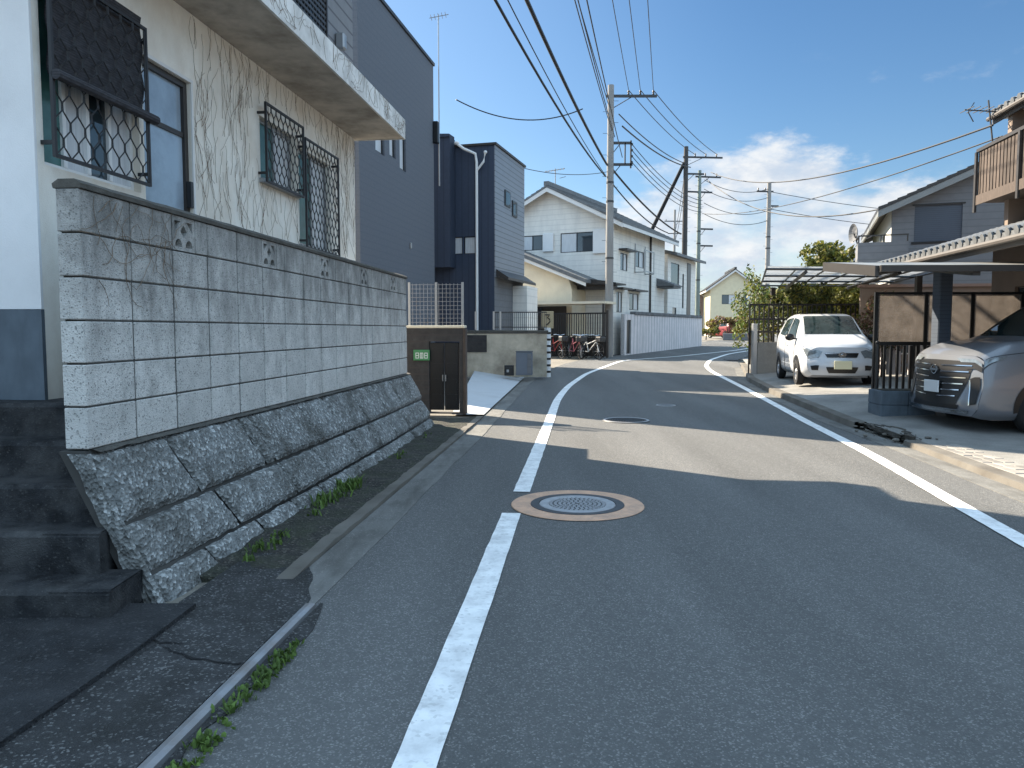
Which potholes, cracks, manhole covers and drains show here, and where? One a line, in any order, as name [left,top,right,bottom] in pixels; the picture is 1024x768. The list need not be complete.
manhole cover [511,490,644,521]
crack [135,639,241,665]
